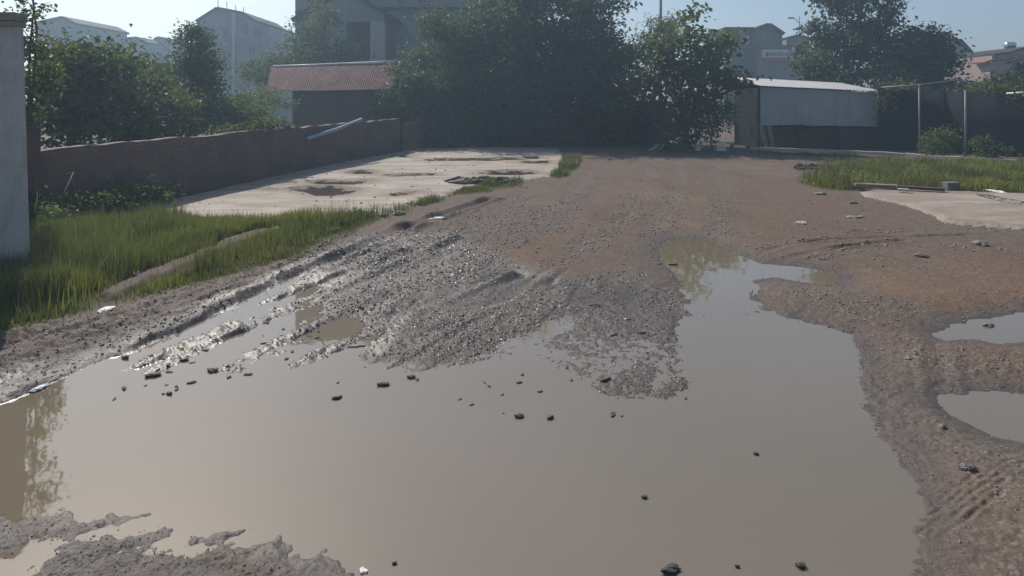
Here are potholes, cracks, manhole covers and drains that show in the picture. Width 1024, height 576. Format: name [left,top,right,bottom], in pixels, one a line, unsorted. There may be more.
pothole [923,305,1024,347]
pothole [653,236,848,317]
pothole [0,283,943,576]
pothole [930,383,1024,447]
